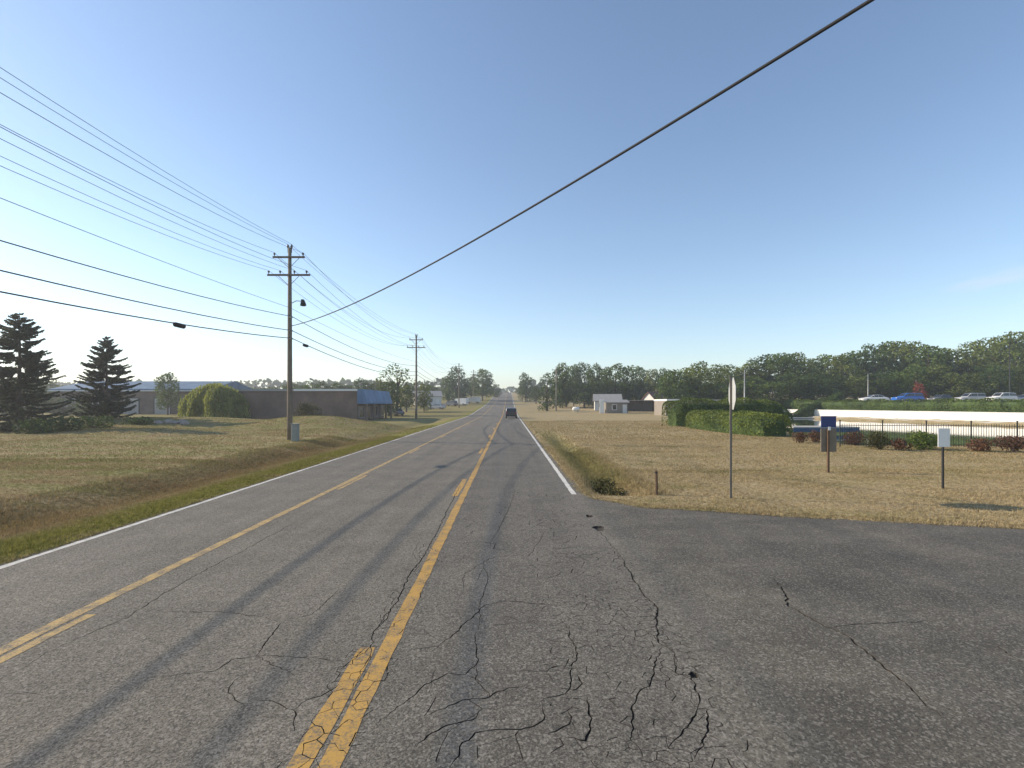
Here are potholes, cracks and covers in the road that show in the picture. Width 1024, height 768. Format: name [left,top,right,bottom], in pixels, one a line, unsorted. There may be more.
crack [277,487,749,768]
crack [774,579,941,716]
